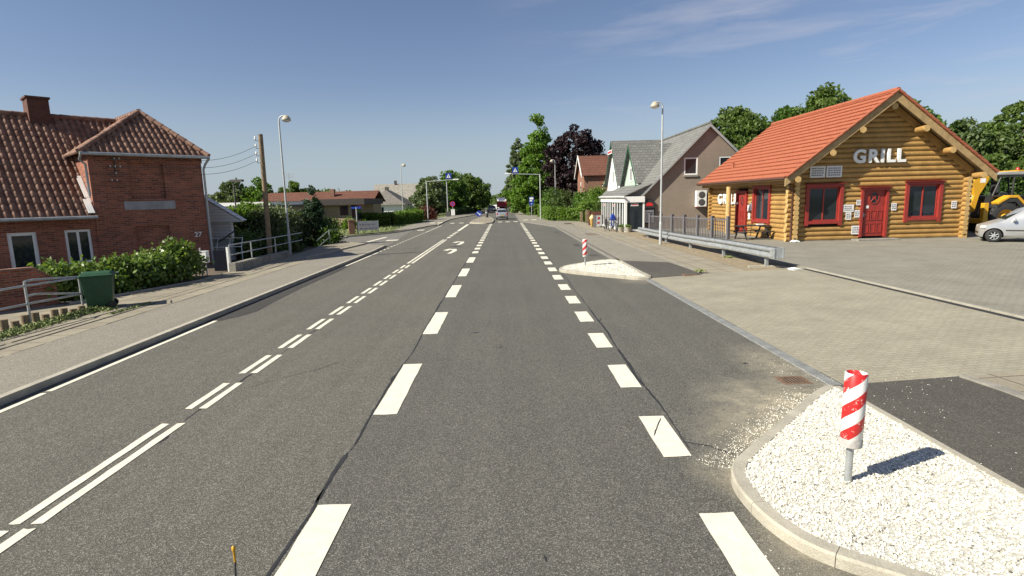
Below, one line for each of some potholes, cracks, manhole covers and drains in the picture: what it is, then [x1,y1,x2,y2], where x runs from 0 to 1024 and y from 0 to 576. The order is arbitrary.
drain grate [774,376,813,385]
